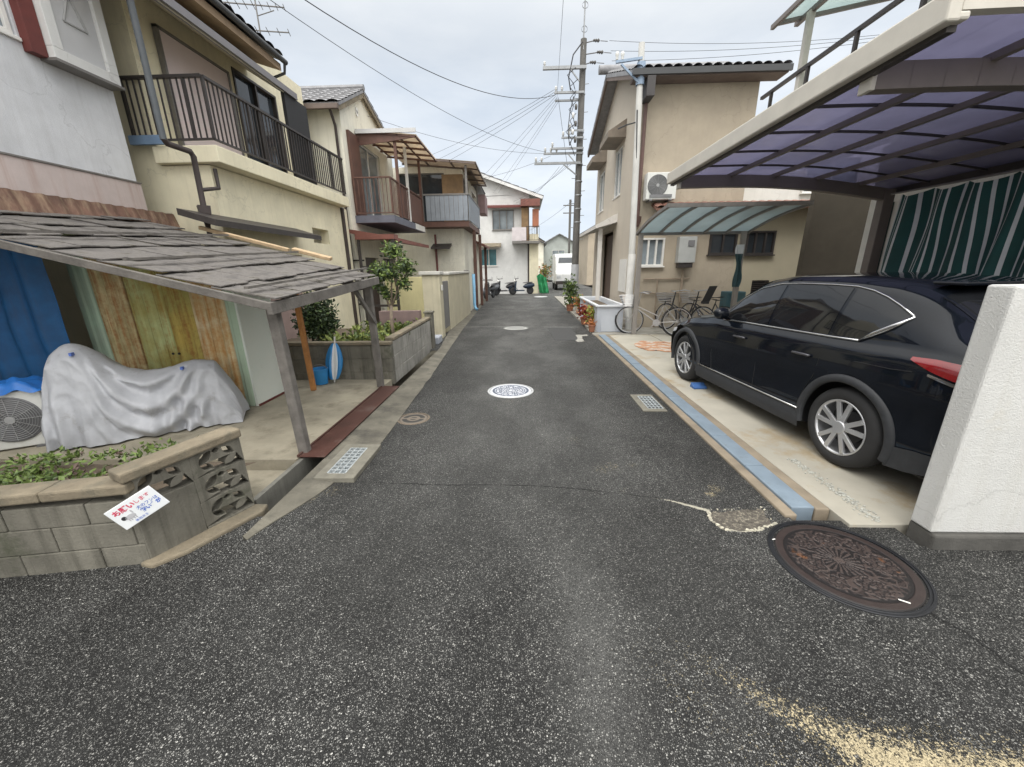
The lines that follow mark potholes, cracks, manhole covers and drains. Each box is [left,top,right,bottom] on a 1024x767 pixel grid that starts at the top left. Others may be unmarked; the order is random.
drain grate [630,394,667,412]
manhole cover [488,384,534,398]
manhole cover [397,413,430,425]
manhole cover [767,521,938,618]
drain grate [313,444,381,483]
